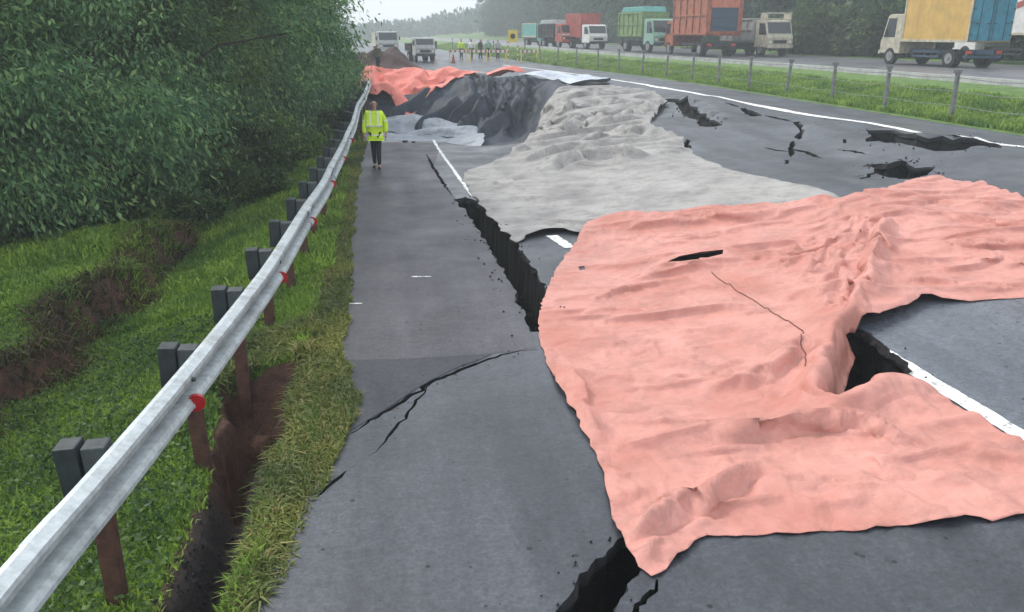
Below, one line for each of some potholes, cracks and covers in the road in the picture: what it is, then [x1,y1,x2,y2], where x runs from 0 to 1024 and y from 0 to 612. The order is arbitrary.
crack [632,579,658,612]
crack [726,103,793,122]
crack [318,471,346,496]
crack [426,154,452,196]
crack [351,348,528,456]
crack [767,141,865,159]
pothole [865,130,1002,151]
pothole [864,160,935,179]
